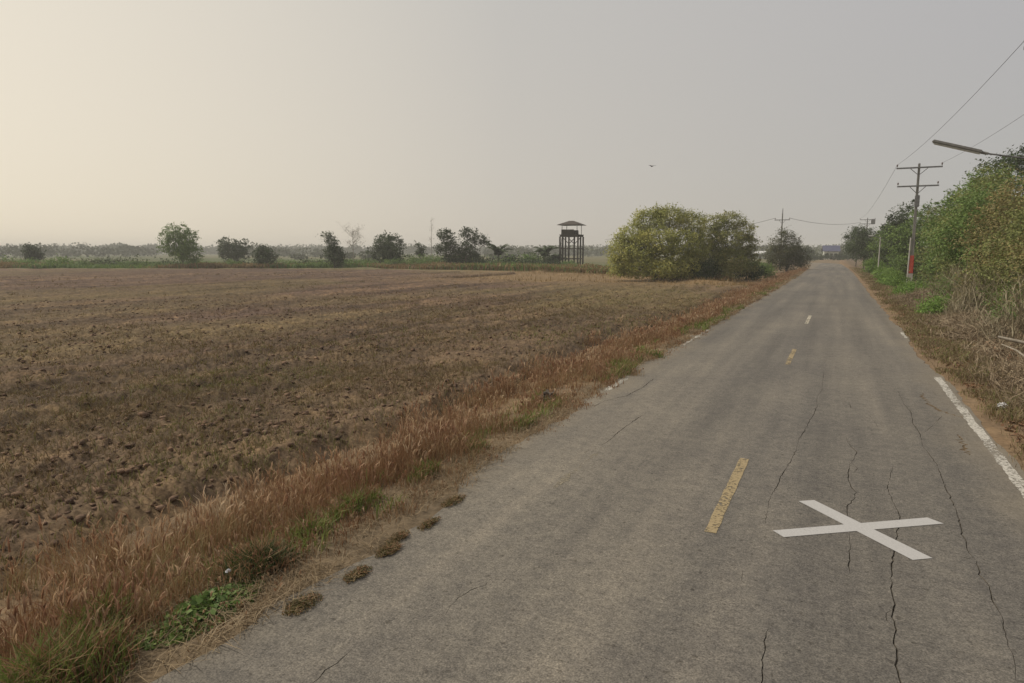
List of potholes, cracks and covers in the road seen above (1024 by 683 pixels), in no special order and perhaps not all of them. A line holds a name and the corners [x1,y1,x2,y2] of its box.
crack [755,625,770,683]
crack [765,376,824,523]
crack [846,441,861,571]
crack [898,391,1018,683]
crack [886,467,902,683]
